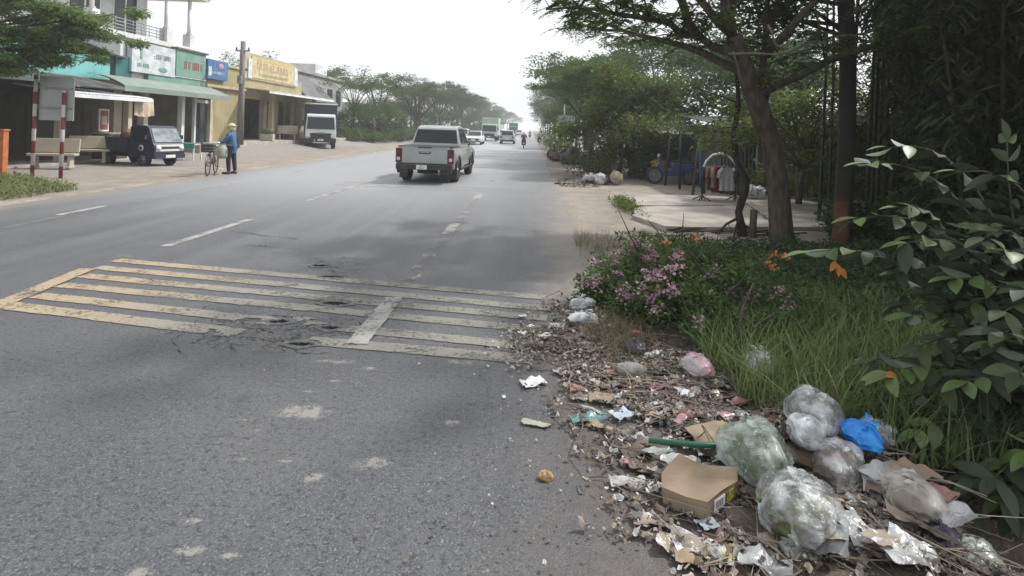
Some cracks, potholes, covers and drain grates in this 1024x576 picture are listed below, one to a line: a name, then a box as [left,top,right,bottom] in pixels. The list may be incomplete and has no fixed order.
pothole [315,324,348,332]
crack [134,299,361,357]
pothole [262,318,296,326]
pothole [280,339,321,349]
